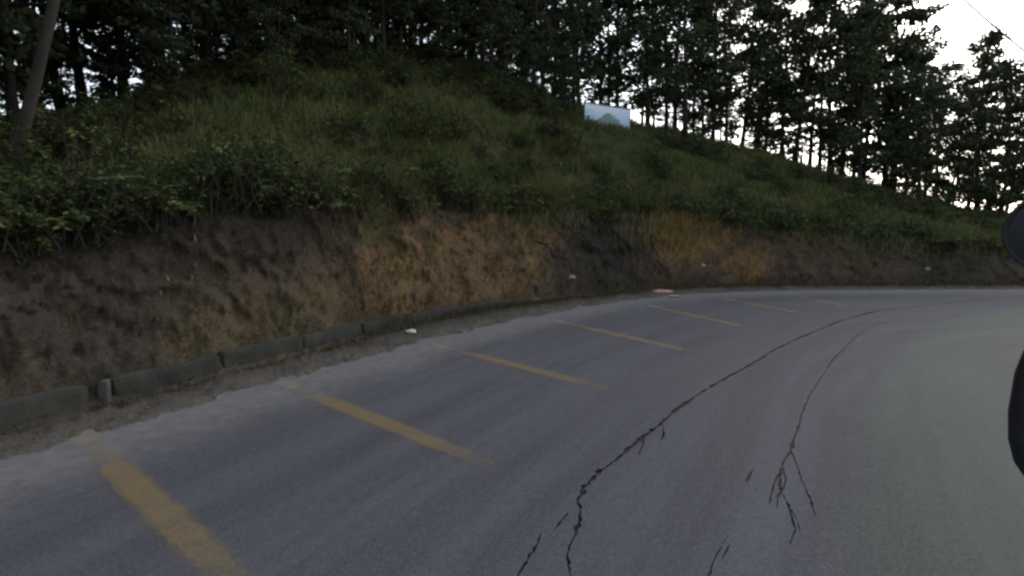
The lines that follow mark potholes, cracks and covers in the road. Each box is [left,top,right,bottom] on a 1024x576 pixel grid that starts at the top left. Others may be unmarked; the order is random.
crack [517,297,1016,576]
